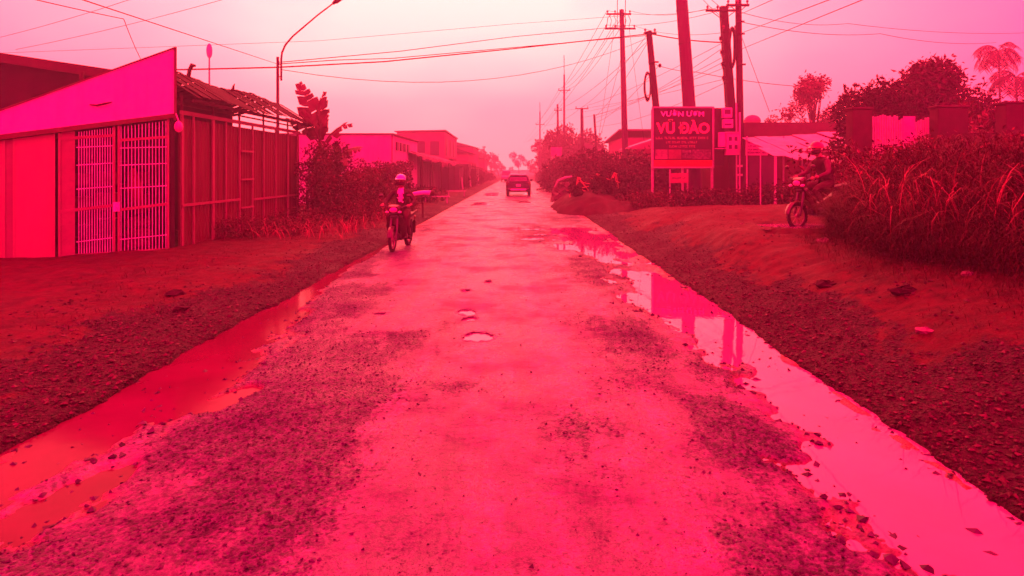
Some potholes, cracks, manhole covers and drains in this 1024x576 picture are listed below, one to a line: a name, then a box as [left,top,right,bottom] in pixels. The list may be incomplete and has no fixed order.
pothole [459,331,499,343]
